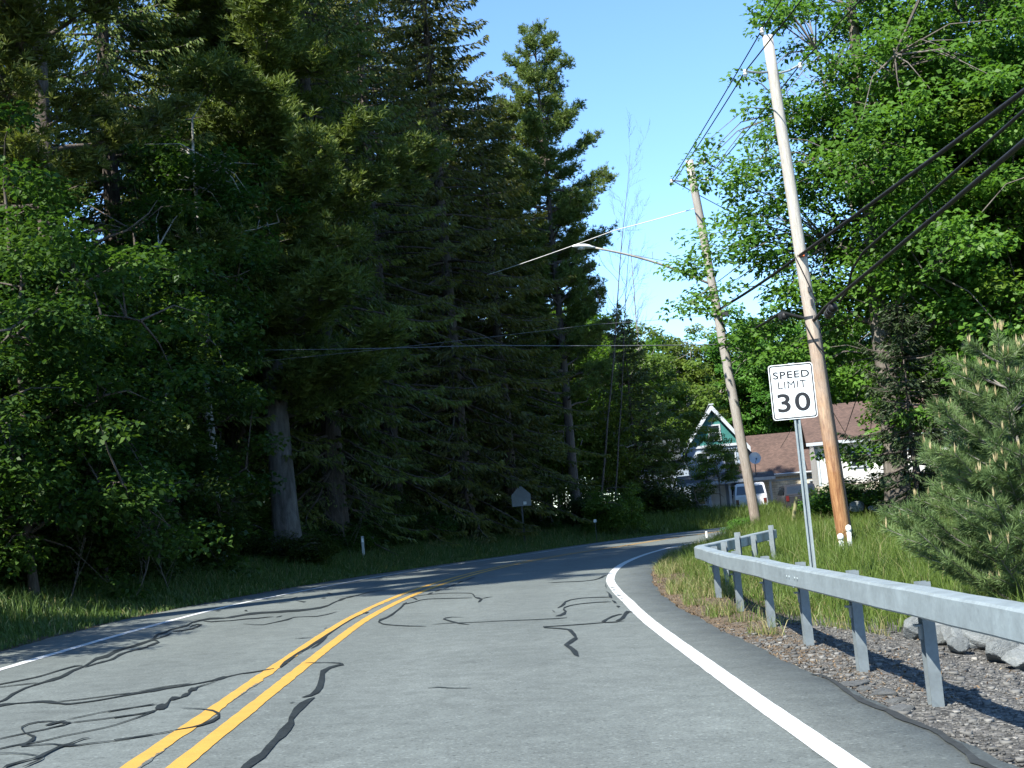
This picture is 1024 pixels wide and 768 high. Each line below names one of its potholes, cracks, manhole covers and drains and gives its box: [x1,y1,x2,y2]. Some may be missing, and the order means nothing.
crack [0,575,632,768]
